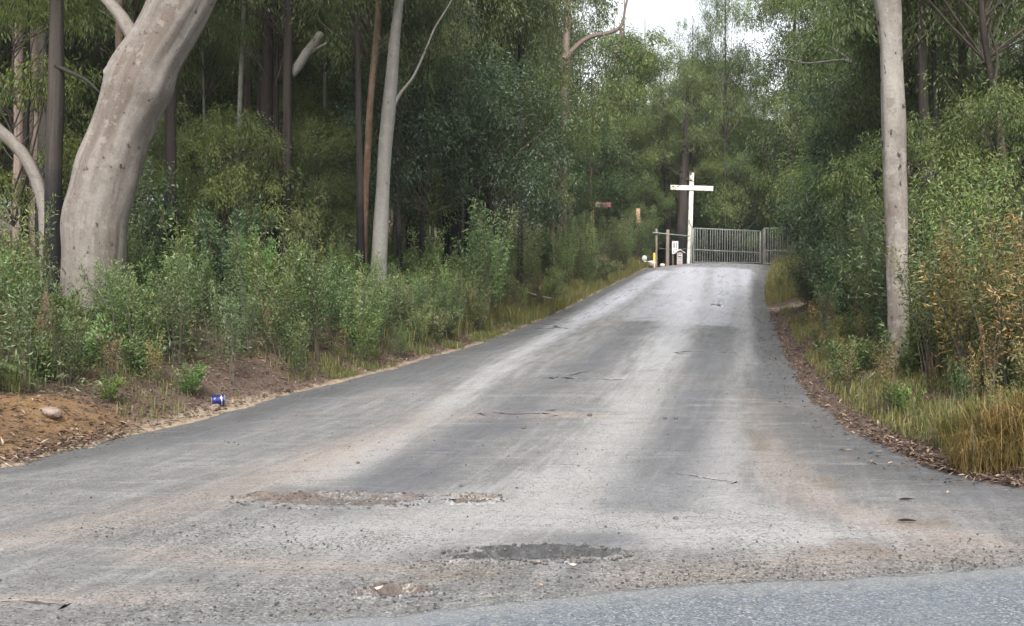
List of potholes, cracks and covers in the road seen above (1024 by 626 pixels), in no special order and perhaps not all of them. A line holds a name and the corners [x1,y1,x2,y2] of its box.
pothole [430,492,508,505]
crack [473,408,569,418]
pothole [214,489,457,510]
pothole [348,581,443,601]
crack [665,471,742,485]
pothole [435,542,645,565]
crack [542,370,630,382]
